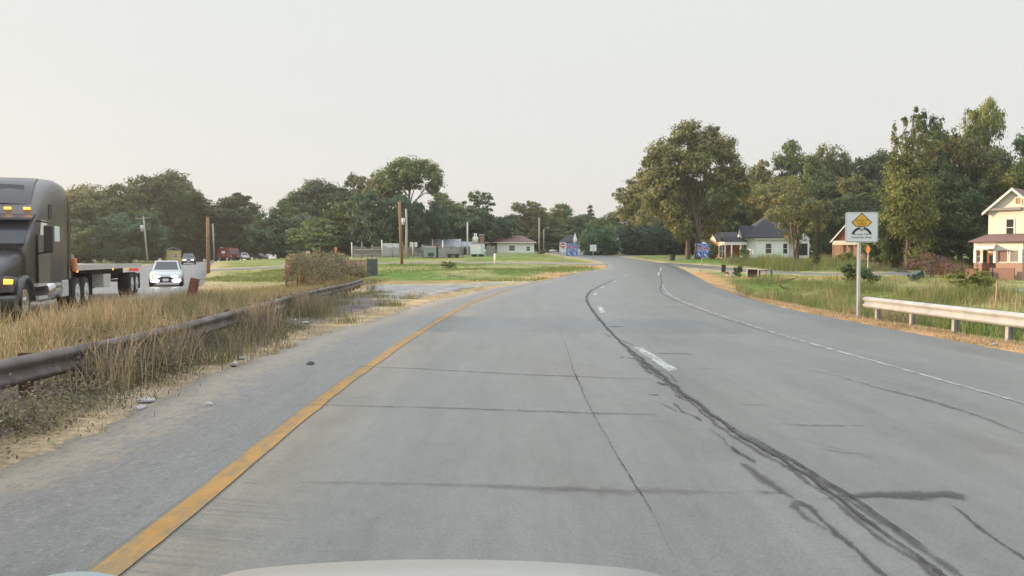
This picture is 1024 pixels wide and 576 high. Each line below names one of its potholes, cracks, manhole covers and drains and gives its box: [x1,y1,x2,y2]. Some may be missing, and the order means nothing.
crack [642,365,701,420]
